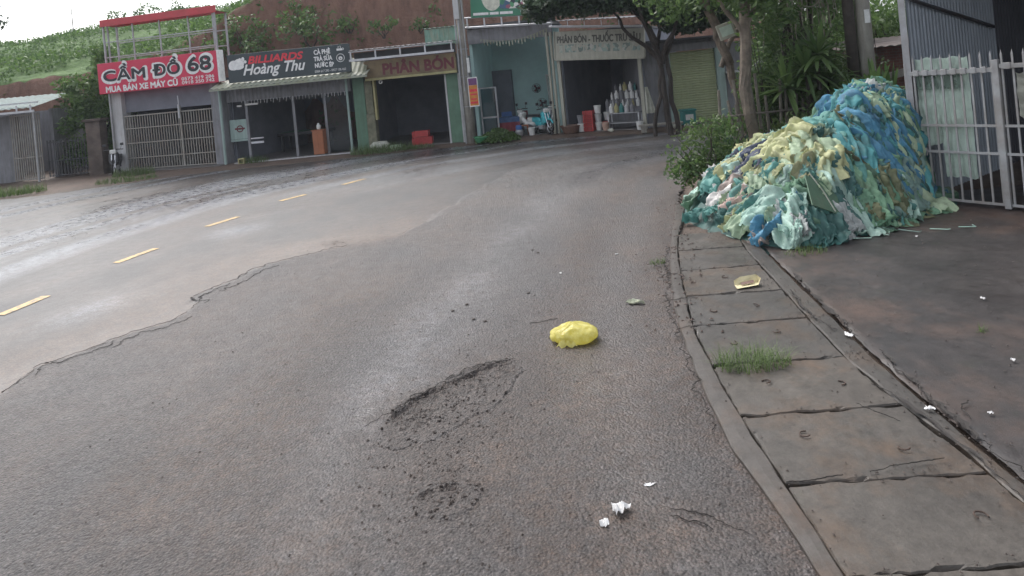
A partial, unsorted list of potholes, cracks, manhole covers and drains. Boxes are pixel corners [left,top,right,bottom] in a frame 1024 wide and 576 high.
pothole [377,357,526,451]
pothole [410,479,483,520]
crack [670,508,749,534]
